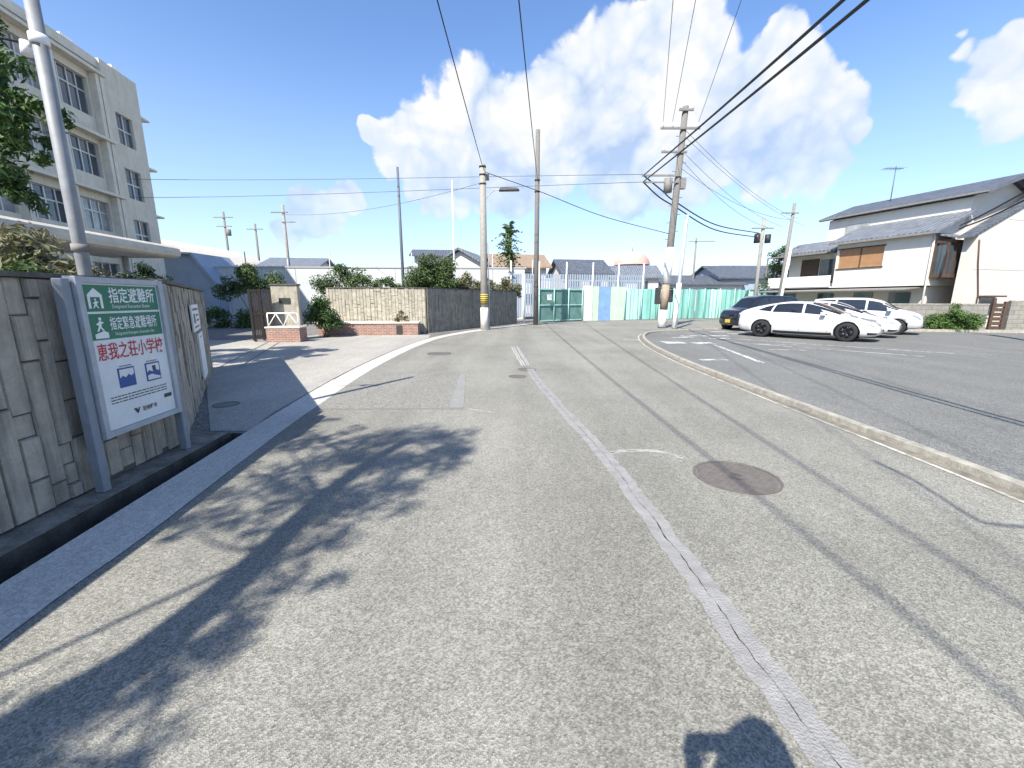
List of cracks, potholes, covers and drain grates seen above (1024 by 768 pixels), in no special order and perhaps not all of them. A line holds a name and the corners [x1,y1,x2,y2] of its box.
manhole cover [693,461,784,495]
